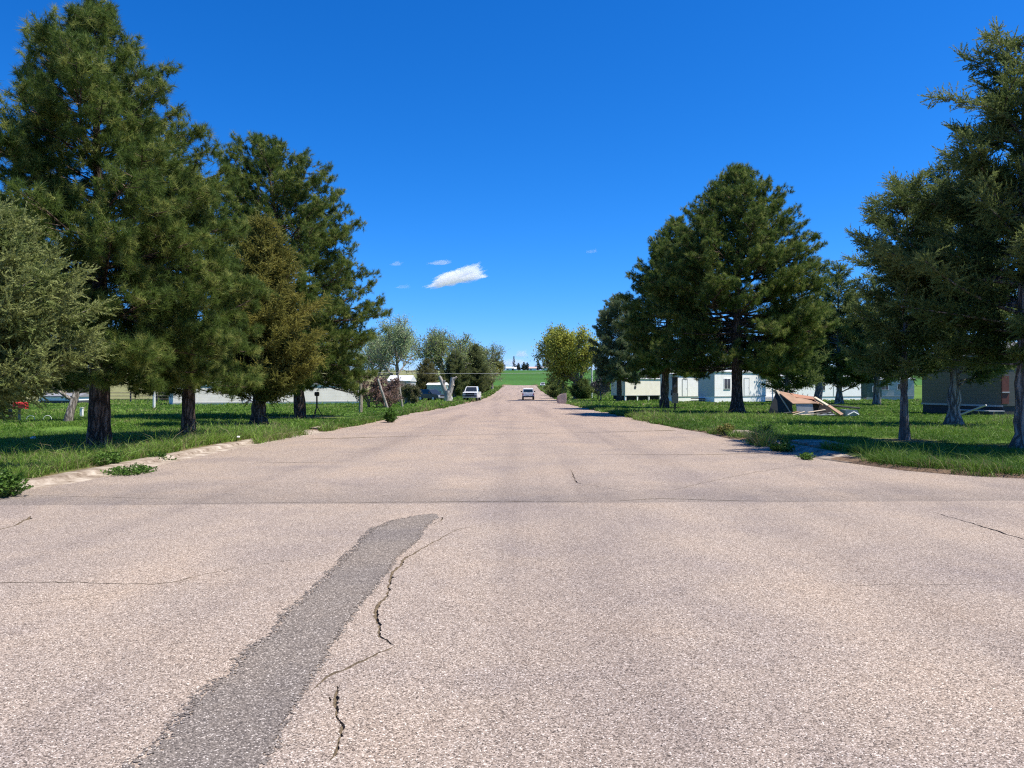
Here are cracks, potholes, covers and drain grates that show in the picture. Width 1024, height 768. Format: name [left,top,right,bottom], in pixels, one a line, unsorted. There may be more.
crack [934,512,1023,539]
crack [311,517,495,762]
crack [0,551,340,607]
